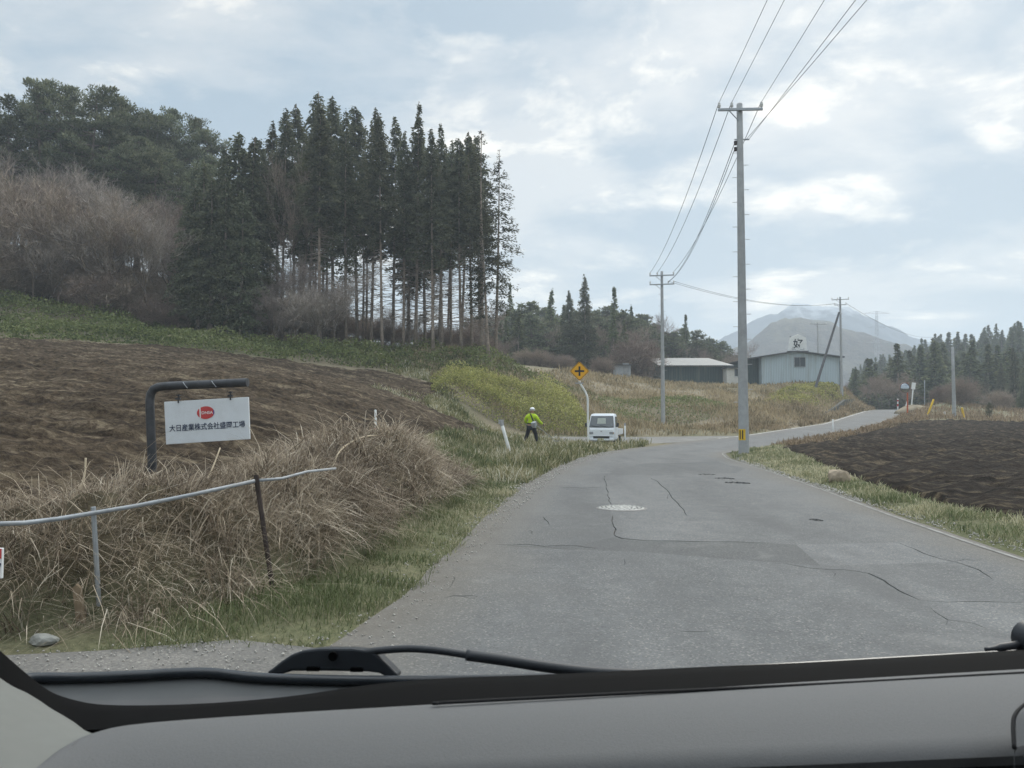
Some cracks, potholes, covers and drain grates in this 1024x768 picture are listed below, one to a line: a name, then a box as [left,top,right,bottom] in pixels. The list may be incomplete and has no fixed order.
crack [900,543,992,579]
crack [781,563,991,628]
crack [500,518,590,550]
